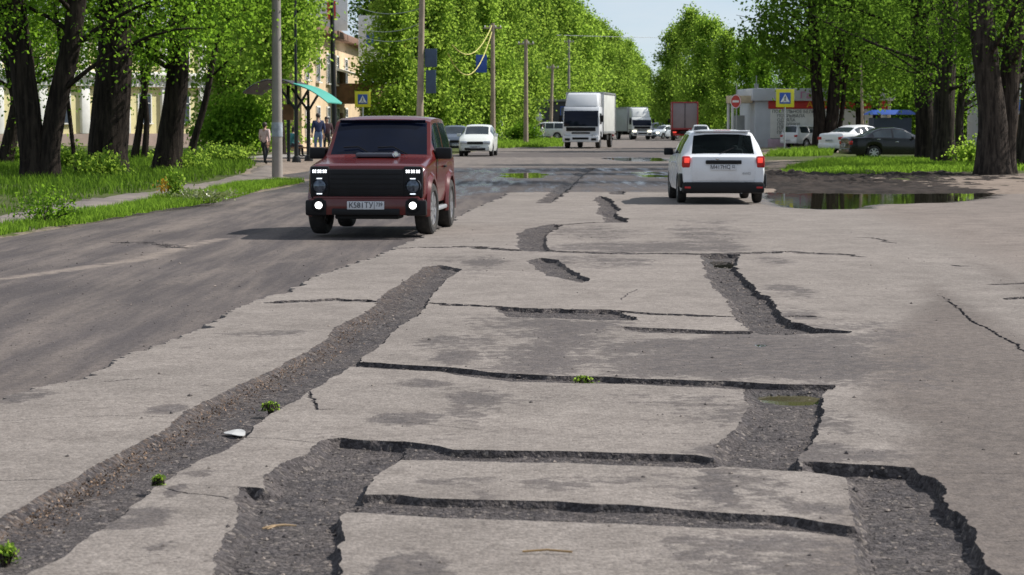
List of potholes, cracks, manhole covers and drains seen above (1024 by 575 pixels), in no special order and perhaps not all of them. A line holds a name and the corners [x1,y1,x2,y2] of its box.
crack [937,283,1024,352]
pothole [700,254,852,335]
pothole [593,196,630,223]
pothole [802,461,1002,575]
pothole [711,389,825,471]
pothole [0,265,462,575]
pothole [527,258,590,283]
pothole [516,224,563,252]
